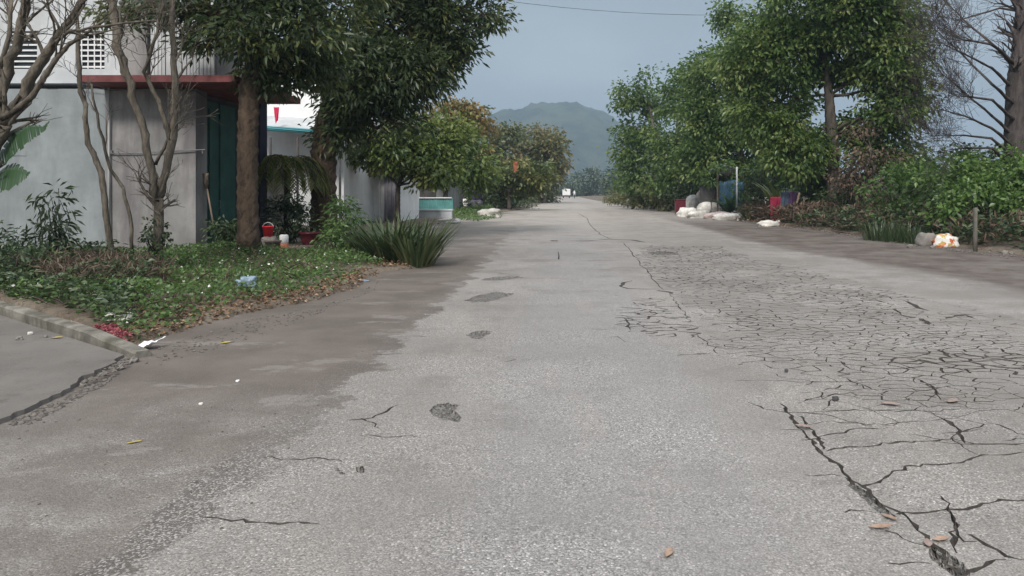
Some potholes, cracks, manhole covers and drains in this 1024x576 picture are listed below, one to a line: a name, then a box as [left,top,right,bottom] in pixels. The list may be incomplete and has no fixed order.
crack [604,280,708,355]
crack [636,245,1024,576]
crack [351,405,417,437]
pothole [429,402,462,422]
crack [200,516,319,525]
